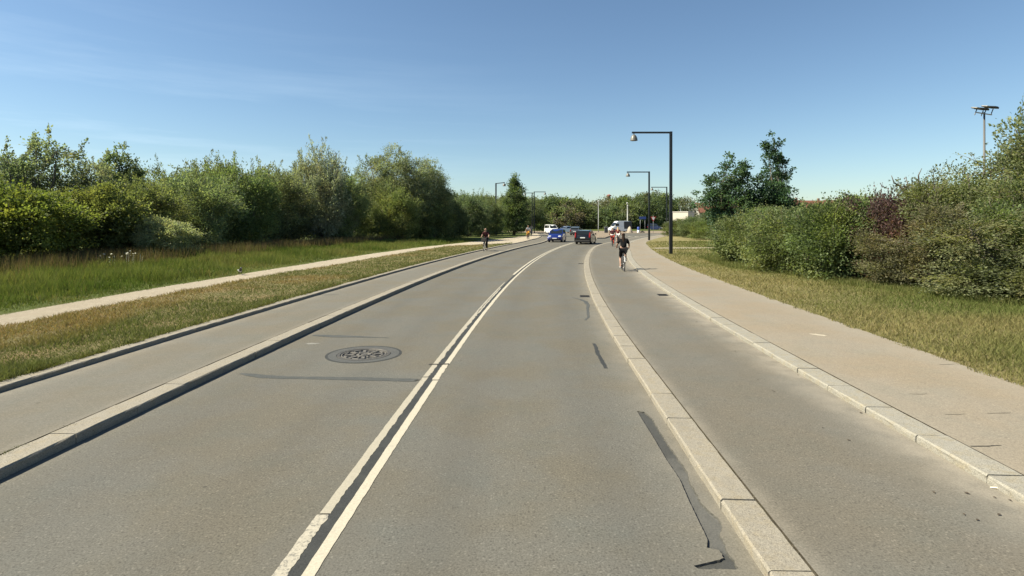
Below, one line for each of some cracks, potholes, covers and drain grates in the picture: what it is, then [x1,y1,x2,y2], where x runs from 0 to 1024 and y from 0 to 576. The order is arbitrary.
manhole cover [325,346,402,363]
